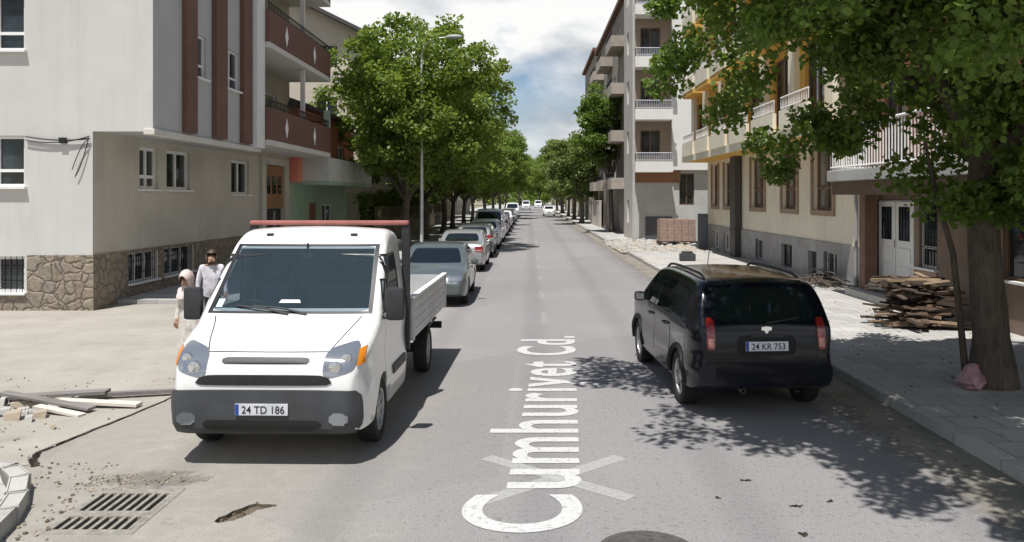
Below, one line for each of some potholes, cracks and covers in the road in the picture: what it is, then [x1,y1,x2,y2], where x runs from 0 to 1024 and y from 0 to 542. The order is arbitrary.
pothole [214,502,276,523]
drain grate [39,489,185,535]
crack [28,398,170,467]
manhole cover [601,530,688,542]
